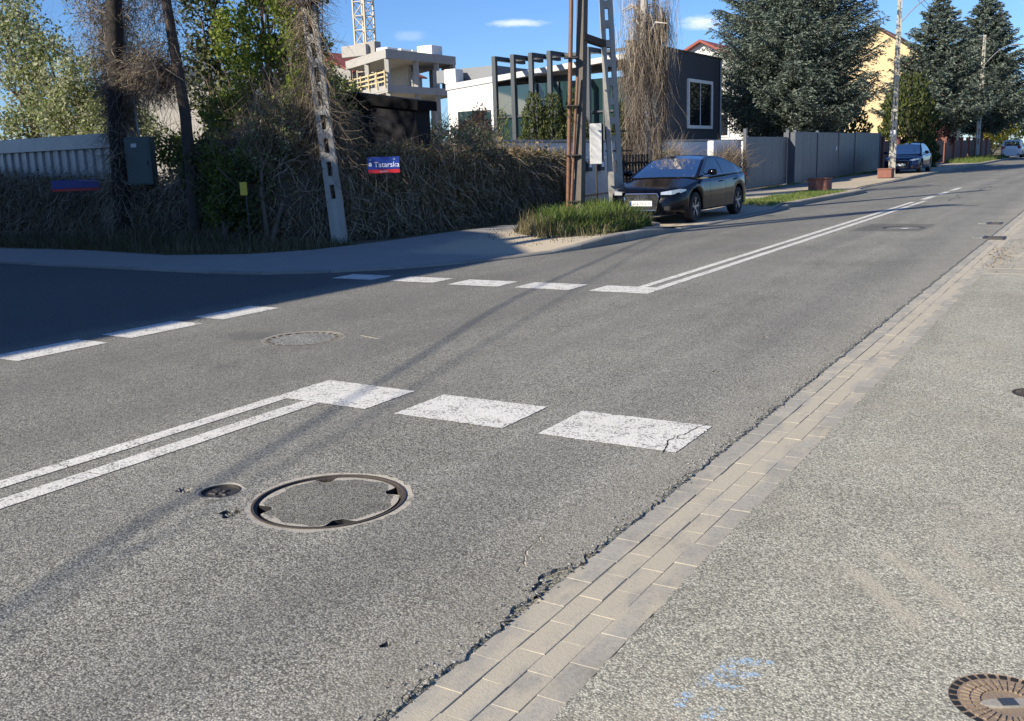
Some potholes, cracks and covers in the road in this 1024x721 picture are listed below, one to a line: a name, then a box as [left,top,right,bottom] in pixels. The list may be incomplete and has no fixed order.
manhole cover [243,473,414,533]
utility cover [194,482,247,498]
utility cover [948,673,1024,721]
manhole cover [260,331,345,346]
crack [516,535,542,572]
